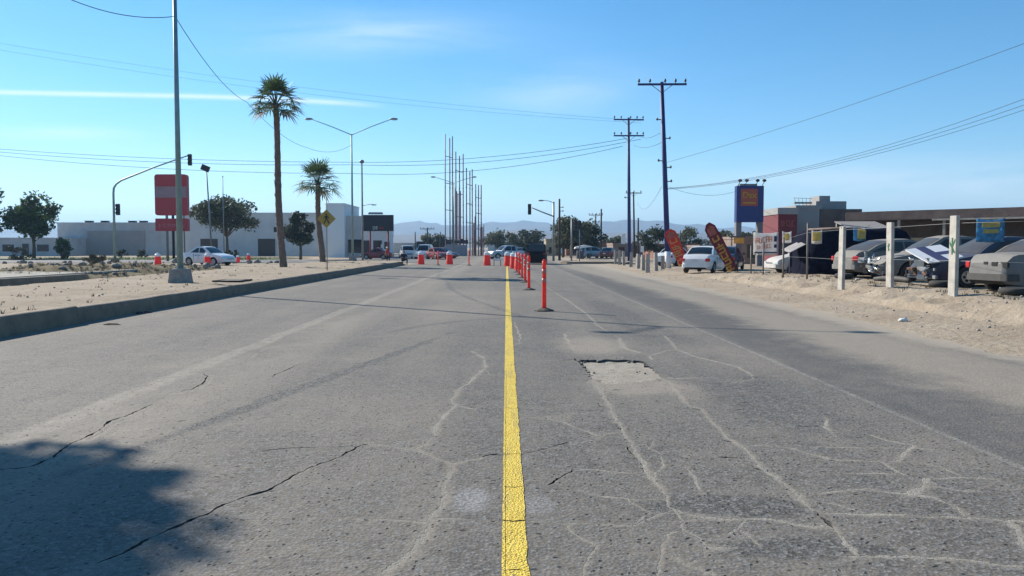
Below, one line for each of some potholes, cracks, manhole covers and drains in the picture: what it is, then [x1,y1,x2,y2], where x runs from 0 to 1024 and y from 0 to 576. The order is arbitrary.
crack [98,351,525,576]
crack [521,359,1024,576]
pothole [579,359,661,384]
crack [0,405,154,470]
